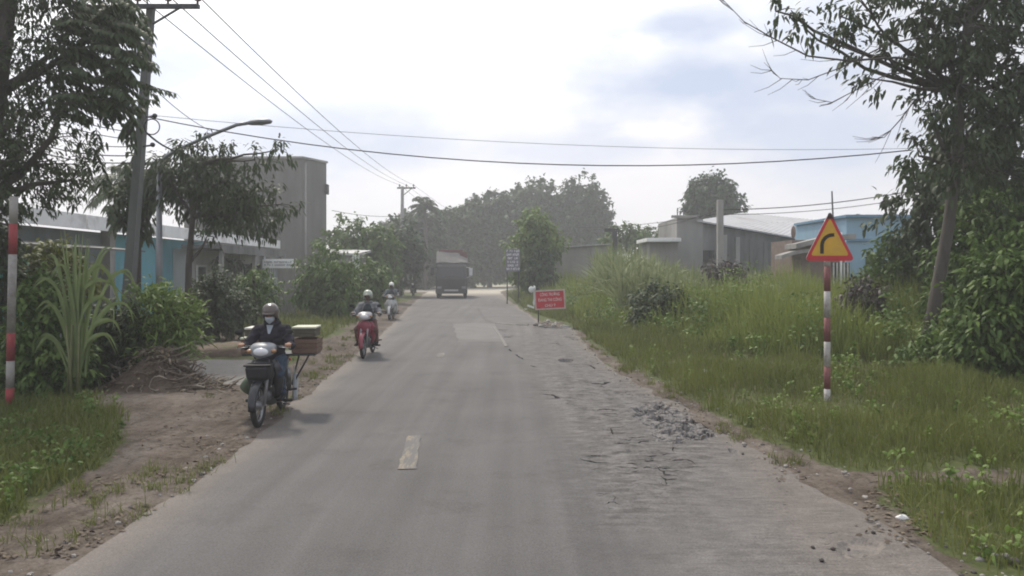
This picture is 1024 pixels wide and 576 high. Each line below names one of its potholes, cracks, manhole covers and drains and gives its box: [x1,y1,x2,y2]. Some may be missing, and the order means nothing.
pothole [623,401,718,444]
crack [542,362,695,485]
